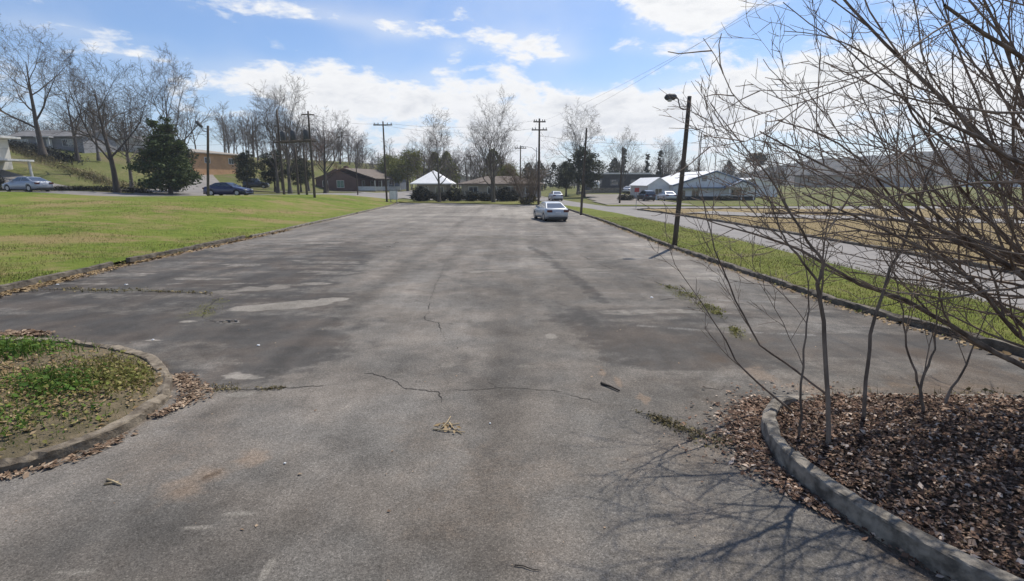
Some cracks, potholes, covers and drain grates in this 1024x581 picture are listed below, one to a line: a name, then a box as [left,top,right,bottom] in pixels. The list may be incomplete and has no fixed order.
crack [346,371,556,402]
crack [58,289,216,322]
